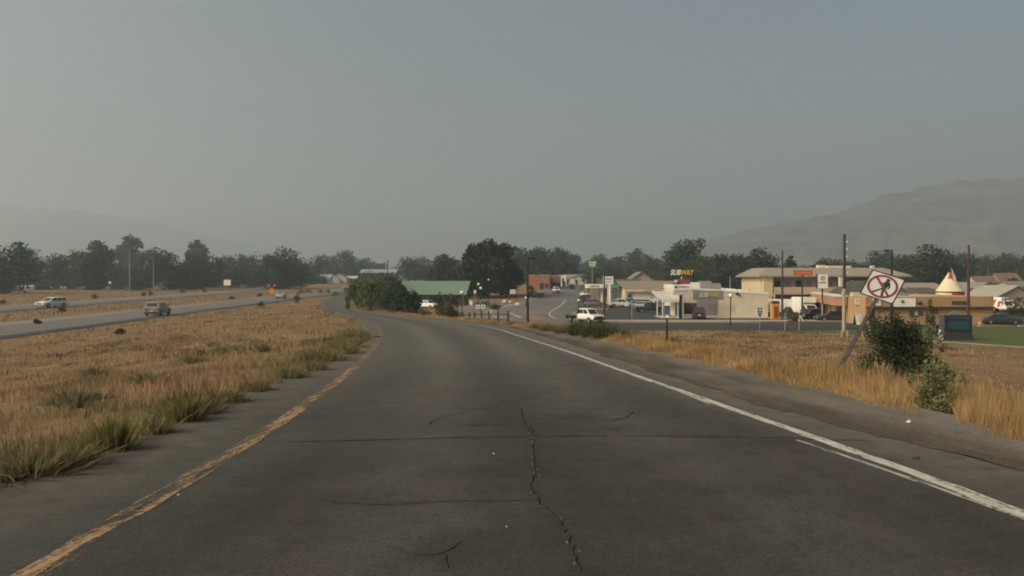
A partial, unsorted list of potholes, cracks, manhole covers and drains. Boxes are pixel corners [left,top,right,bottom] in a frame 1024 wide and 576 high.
crack [302,406,858,572]
